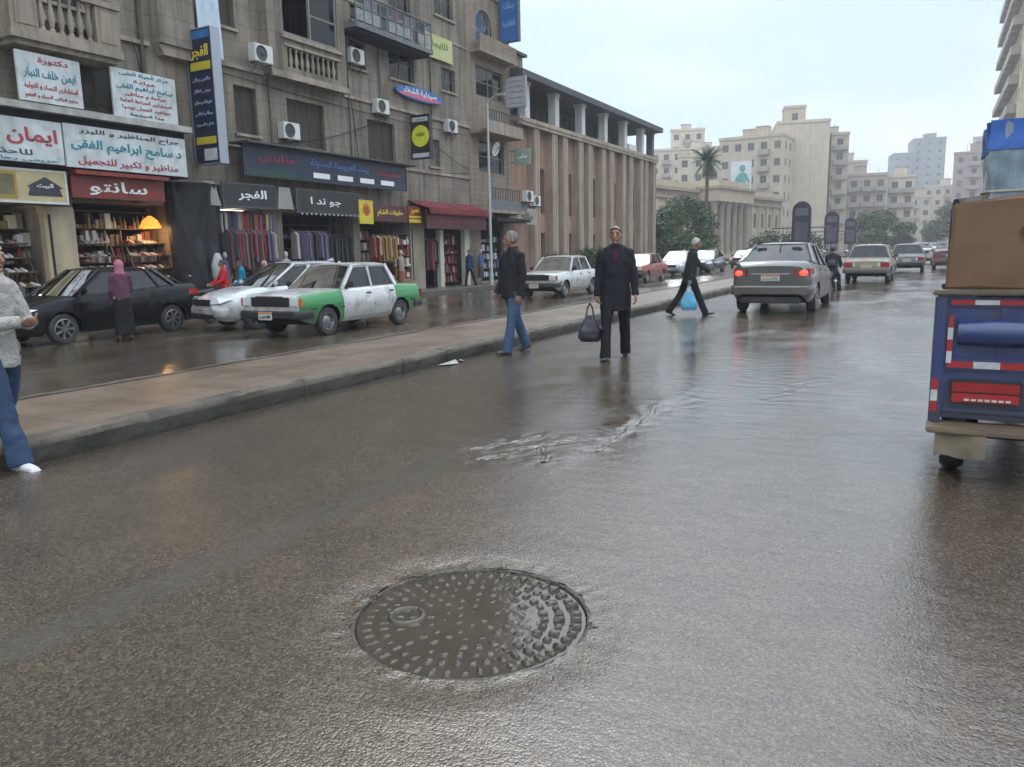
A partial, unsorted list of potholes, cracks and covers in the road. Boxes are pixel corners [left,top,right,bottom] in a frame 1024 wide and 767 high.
manhole cover [349,568,592,681]
